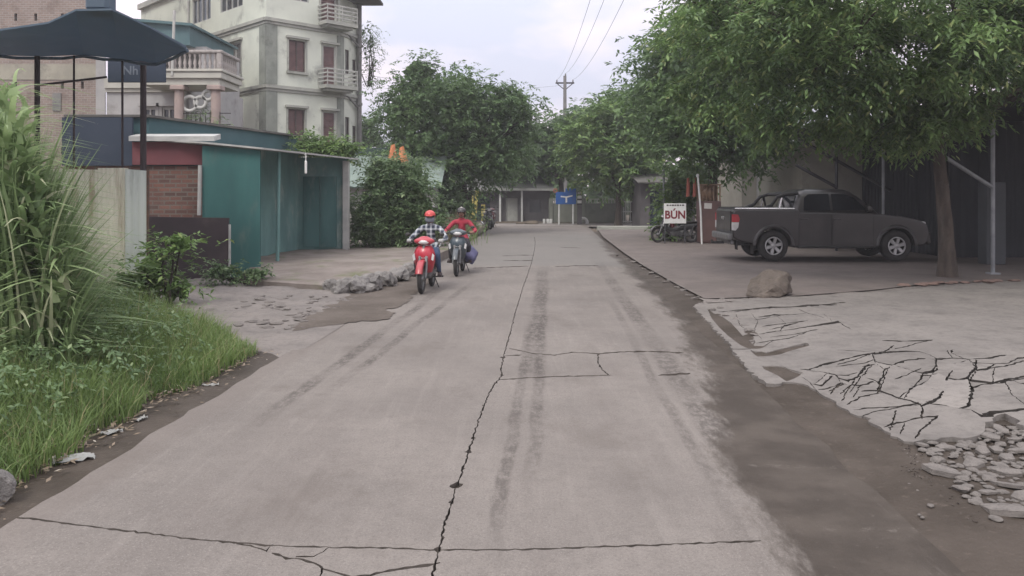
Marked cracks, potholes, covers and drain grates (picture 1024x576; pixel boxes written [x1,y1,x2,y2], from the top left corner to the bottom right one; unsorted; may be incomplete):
crack [18,237,761,576]
crack [722,302,1024,439]
